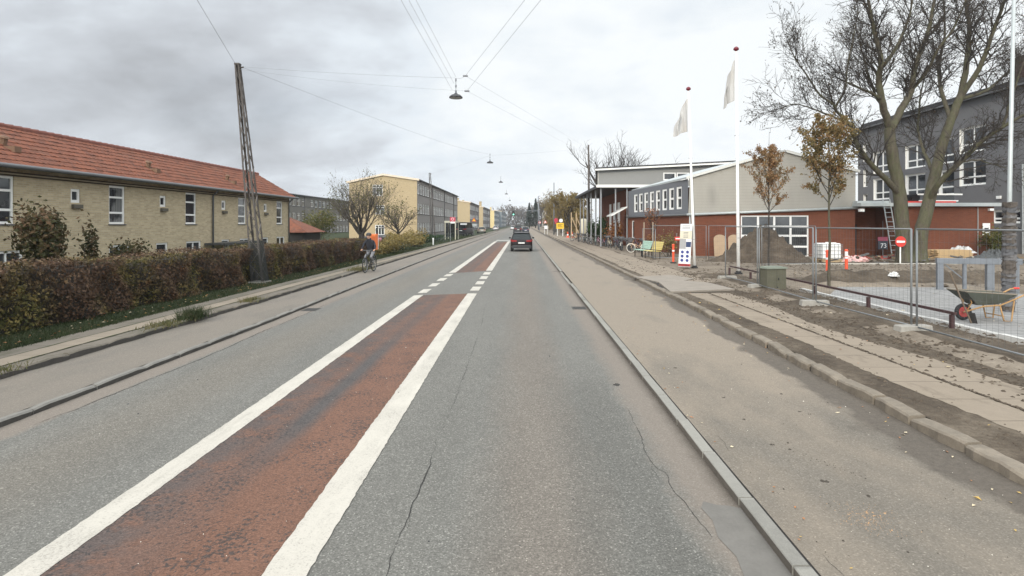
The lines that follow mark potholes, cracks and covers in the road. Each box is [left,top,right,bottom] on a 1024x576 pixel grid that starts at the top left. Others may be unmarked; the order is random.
crack [386,320,483,576]
crack [629,411,712,537]
